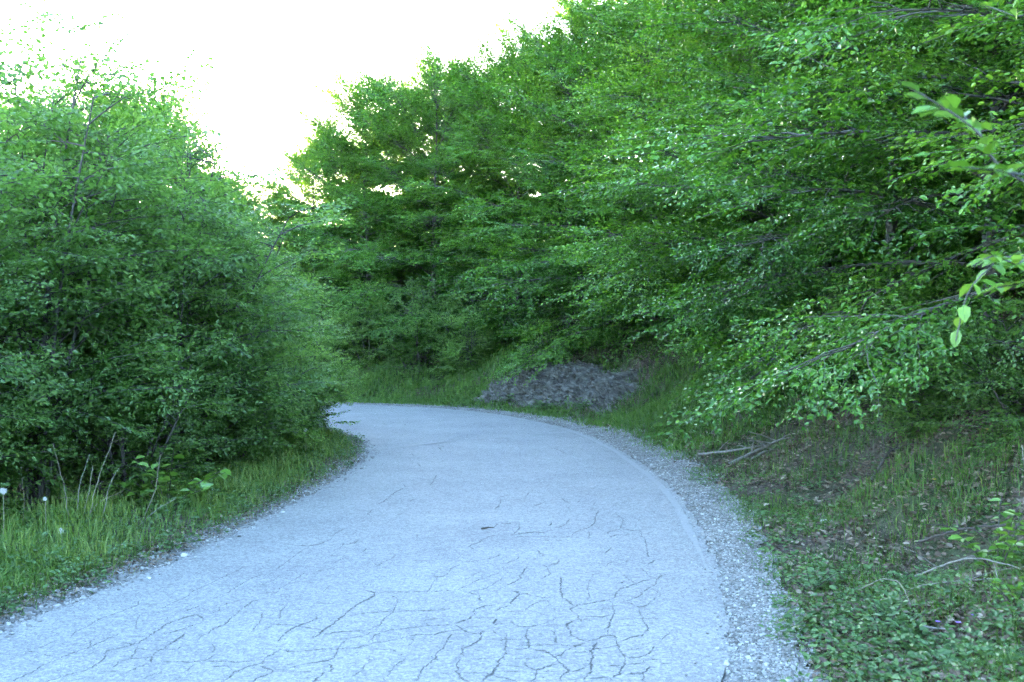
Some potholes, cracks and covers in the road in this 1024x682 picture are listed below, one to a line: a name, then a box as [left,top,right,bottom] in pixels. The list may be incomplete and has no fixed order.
crack [13,454,685,682]
